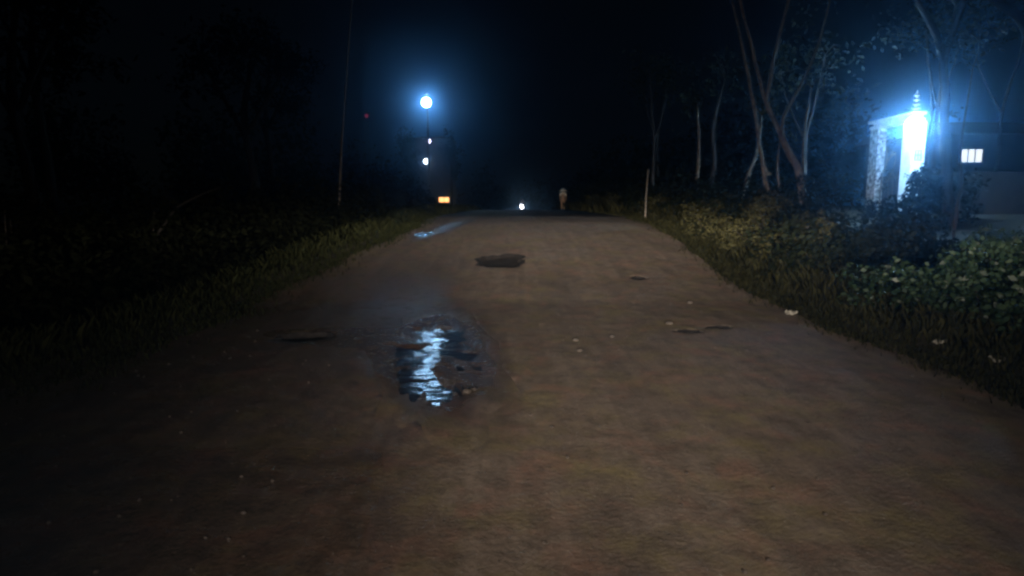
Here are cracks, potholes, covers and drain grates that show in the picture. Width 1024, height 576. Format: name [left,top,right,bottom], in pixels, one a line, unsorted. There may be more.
pothole [371,308,520,456]
pothole [475,254,526,268]
pothole [270,331,336,343]
